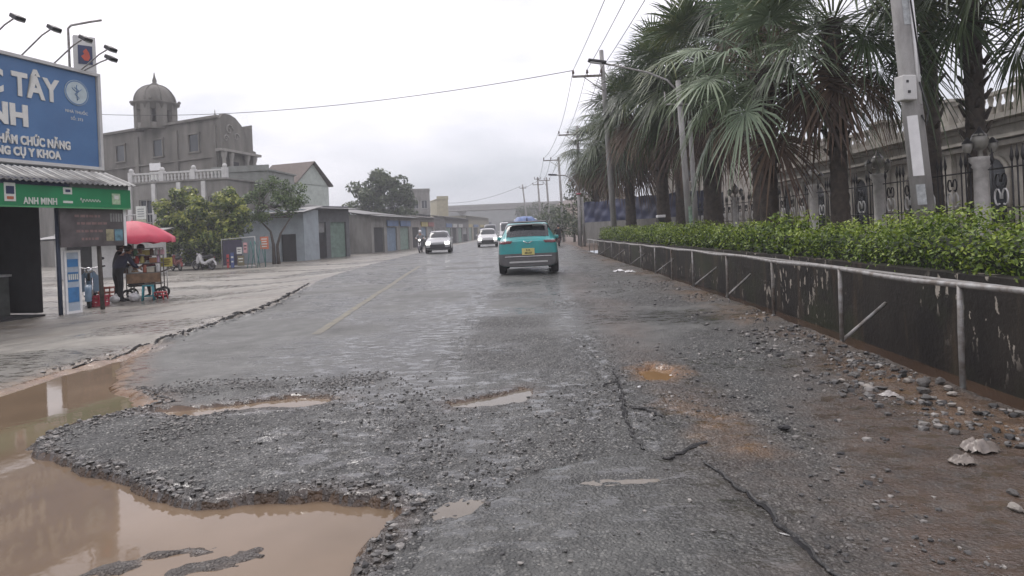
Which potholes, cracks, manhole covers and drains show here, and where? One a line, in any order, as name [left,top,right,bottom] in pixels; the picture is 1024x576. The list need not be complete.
pothole [446,387,533,406]
pothole [633,364,679,379]
crack [603,366,842,576]
pothole [0,344,402,576]
